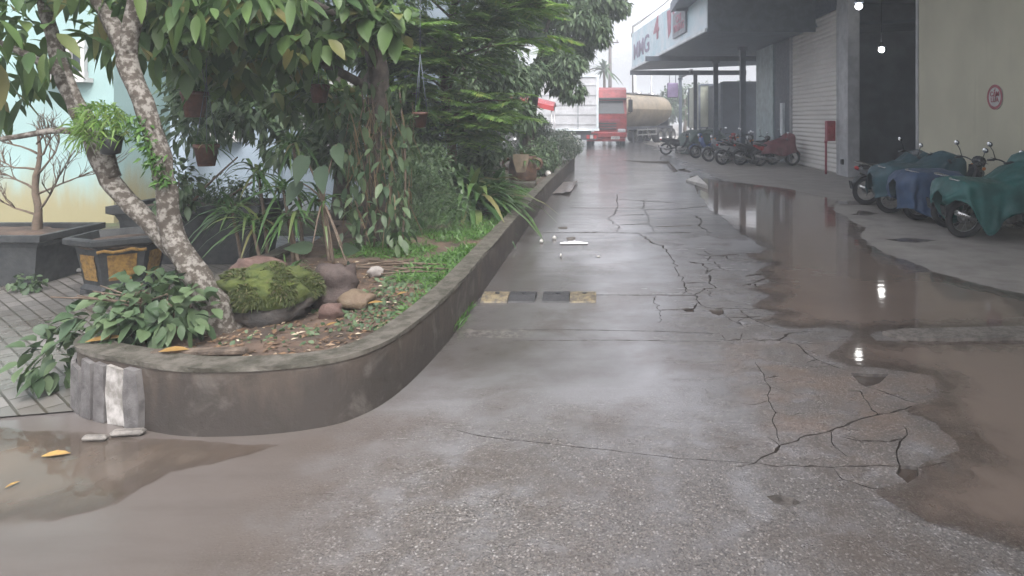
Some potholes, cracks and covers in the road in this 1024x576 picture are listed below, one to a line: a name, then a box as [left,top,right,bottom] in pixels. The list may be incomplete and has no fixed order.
pothole [767,494,801,507]
crack [736,362,946,492]
pothole [896,465,919,483]
pothole [851,373,889,387]
crack [607,196,841,369]
